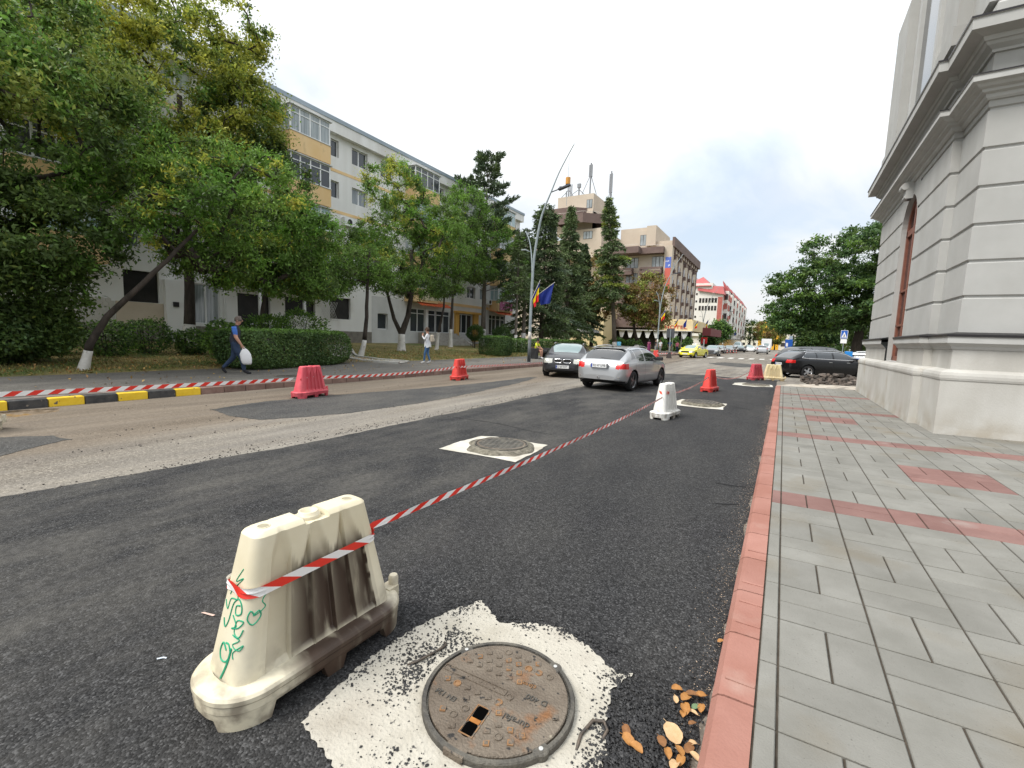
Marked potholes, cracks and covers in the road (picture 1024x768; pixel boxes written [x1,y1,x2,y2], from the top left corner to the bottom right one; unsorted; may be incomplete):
manhole cover [421,642,575,768]
manhole cover [466,437,534,457]
manhole cover [681,399,725,408]
